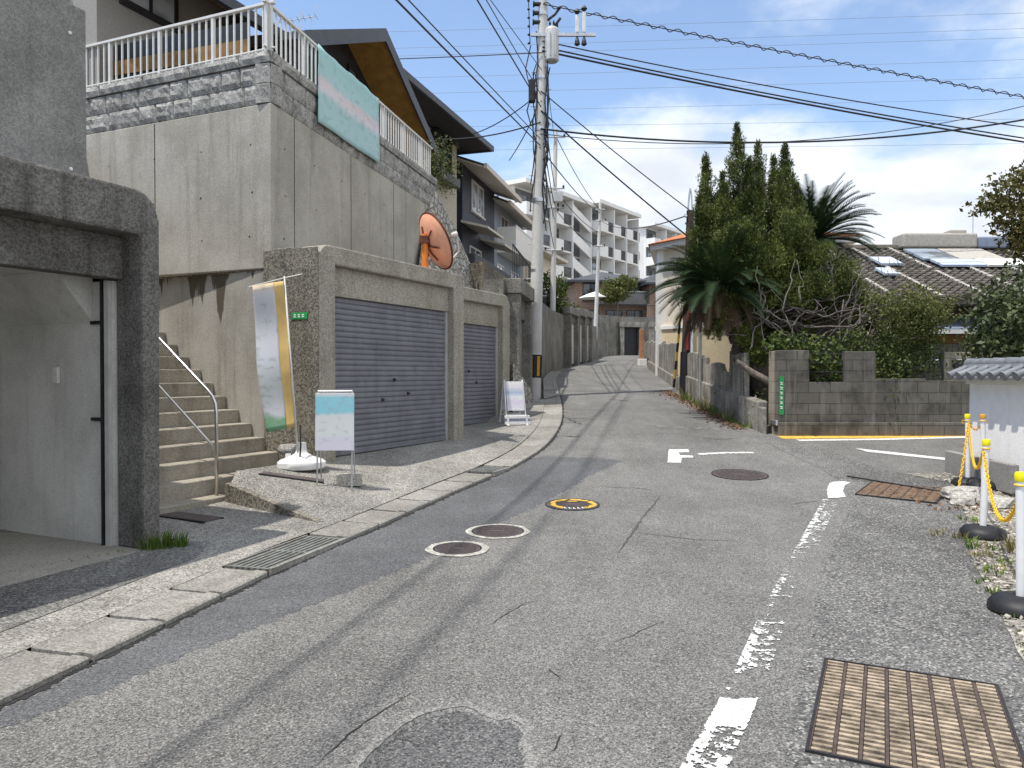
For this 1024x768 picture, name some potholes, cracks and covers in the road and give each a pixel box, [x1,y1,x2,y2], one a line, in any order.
manhole cover [711,469,769,481]
drain grate [855,481,943,504]
drain grate [224,535,347,575]
drain grate [805,657,1024,768]
manhole cover [465,524,530,539]
crack [317,689,418,765]
manhole cover [545,498,600,511]
manhole cover [425,541,489,557]
